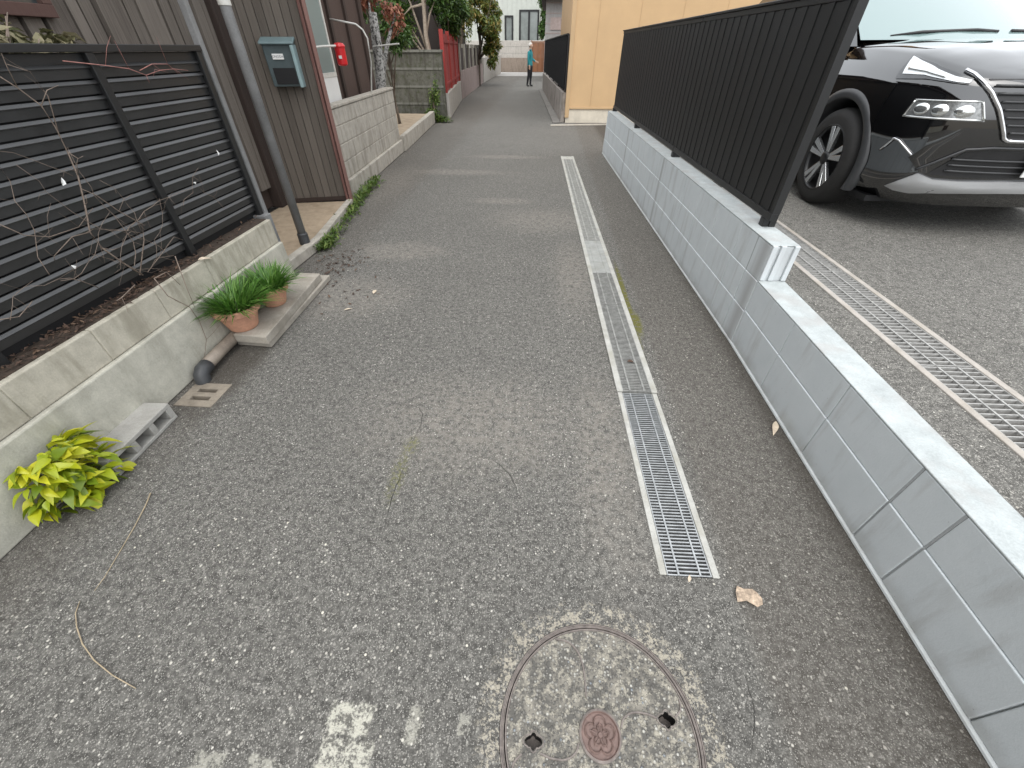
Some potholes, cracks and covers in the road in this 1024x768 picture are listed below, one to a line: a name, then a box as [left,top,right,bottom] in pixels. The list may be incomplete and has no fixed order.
drain grate [584,240,611,273]
drain grate [622,393,712,579]
drain grate [566,171,582,188]
manhole cover [499,624,707,768]
drain grate [601,305,651,394]
drain grate [593,273,622,305]
drain grate [576,210,600,241]
drain grate [808,271,973,368]
drain grate [922,366,1024,451]
drain grate [571,187,590,210]
crack [384,404,423,529]
